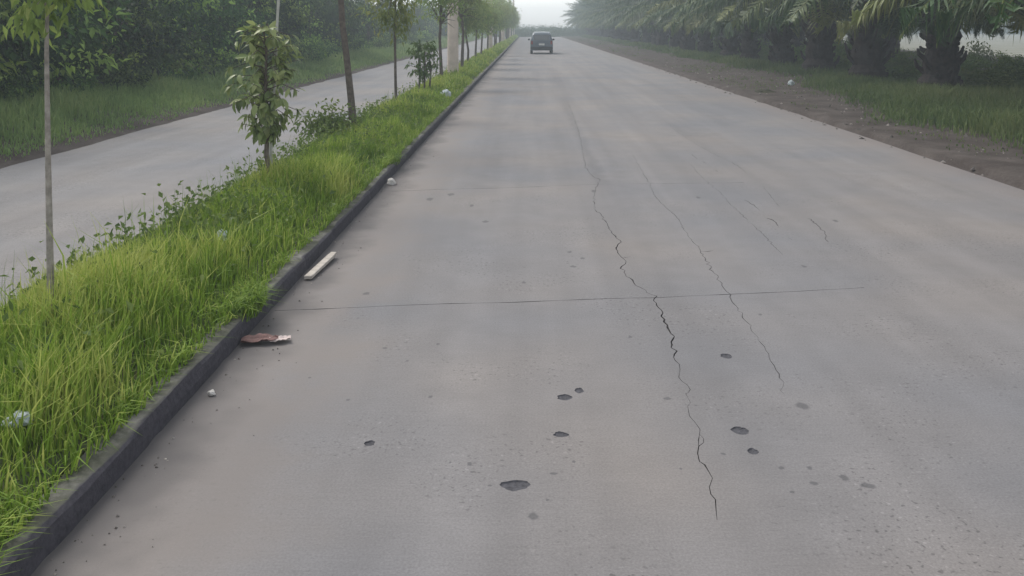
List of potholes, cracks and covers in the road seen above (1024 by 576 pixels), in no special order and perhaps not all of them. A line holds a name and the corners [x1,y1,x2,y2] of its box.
pothole [499,480,531,491]
crack [636,162,784,392]
crack [569,105,717,517]
crack [678,132,827,251]
pothole [730,426,749,435]
